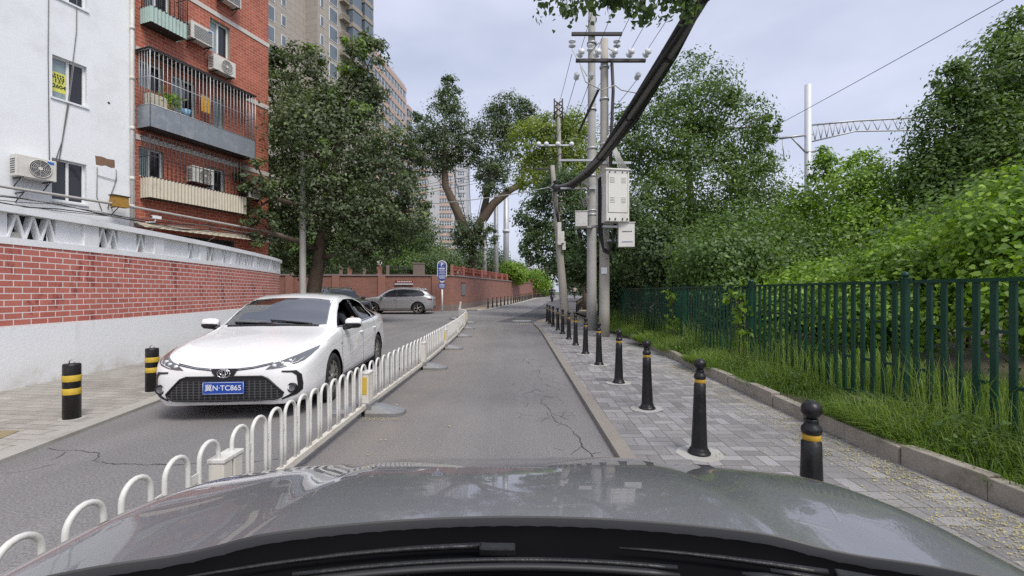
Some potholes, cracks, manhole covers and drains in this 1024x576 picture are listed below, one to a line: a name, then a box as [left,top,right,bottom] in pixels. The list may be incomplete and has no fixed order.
crack [513,363,600,457]
crack [11,448,273,473]
